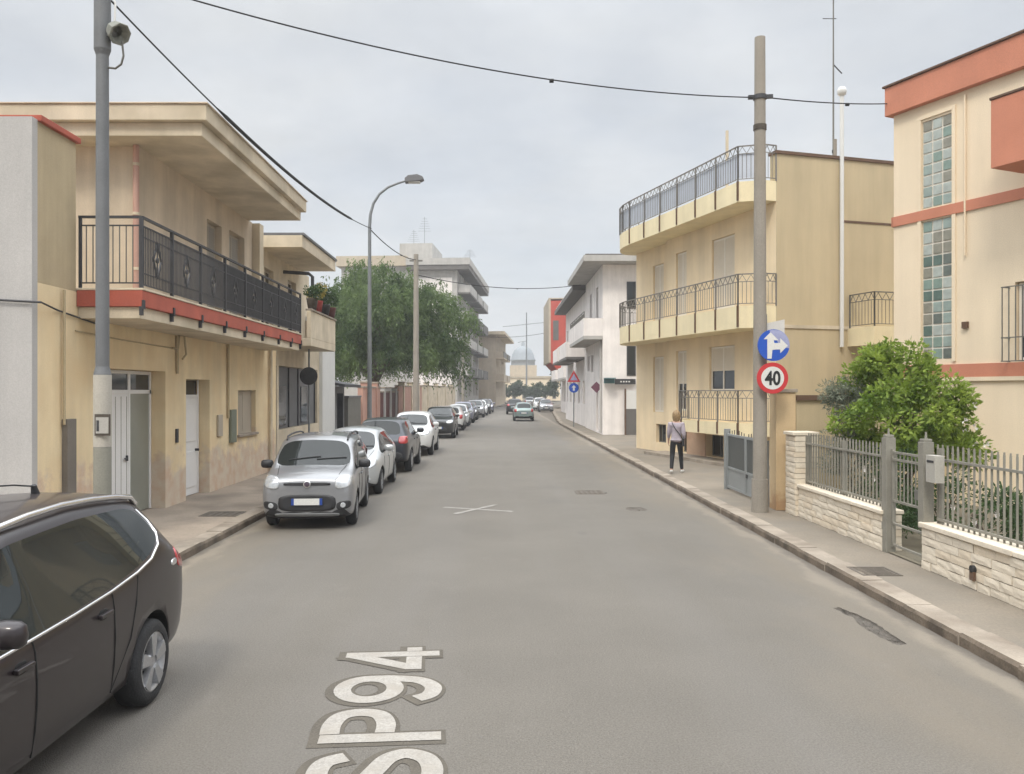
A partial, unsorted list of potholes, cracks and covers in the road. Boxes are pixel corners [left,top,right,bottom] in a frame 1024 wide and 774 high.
pothole [834,607,906,645]
